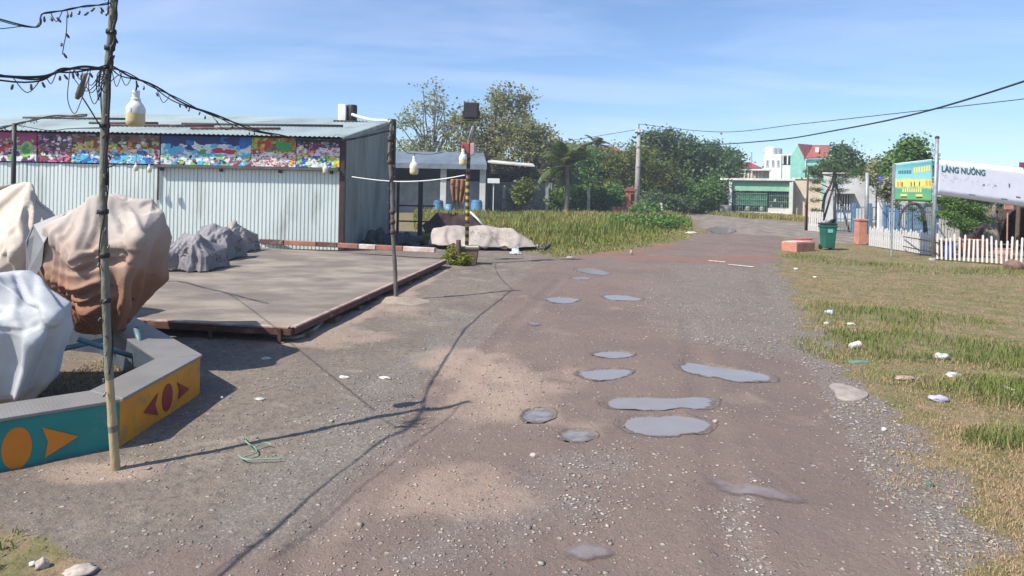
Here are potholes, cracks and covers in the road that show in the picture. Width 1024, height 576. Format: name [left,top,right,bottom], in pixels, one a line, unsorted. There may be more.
pothole [573,267,612,275]
pothole [573,367,635,381]
pothole [557,428,599,443]
pothole [519,407,557,423]
pothole [565,544,611,559]
pothole [673,358,779,383]
pothole [543,296,581,304]
pothole [711,479,803,501]
pothole [614,413,718,437]
pothole [590,350,636,358]
pothole [596,395,721,411]
